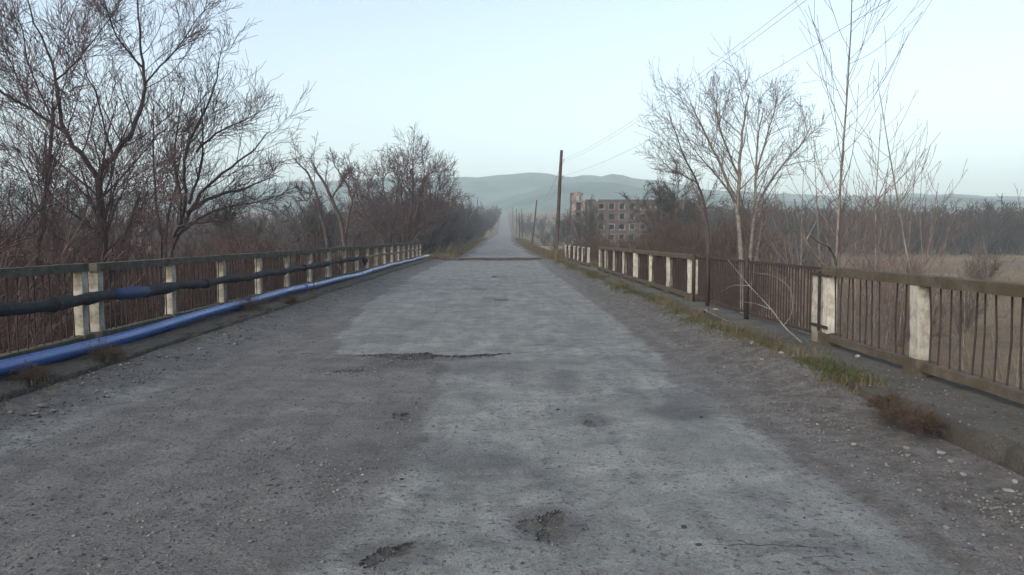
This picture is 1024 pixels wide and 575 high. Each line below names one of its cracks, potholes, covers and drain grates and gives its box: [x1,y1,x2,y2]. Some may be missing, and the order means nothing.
pothole [356,352,511,360]
pothole [358,541,417,569]
pothole [516,510,567,544]
pothole [391,413,415,422]
